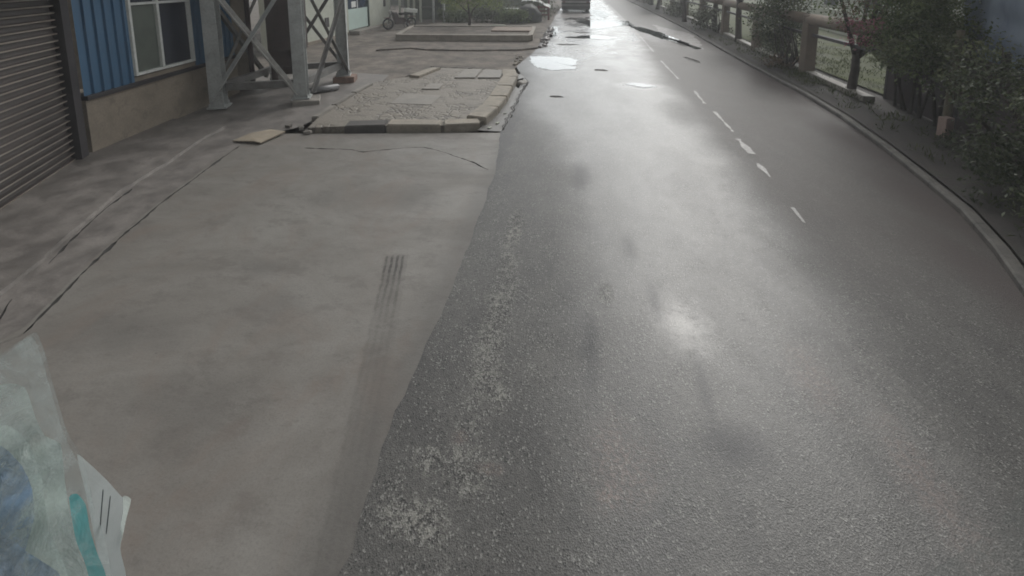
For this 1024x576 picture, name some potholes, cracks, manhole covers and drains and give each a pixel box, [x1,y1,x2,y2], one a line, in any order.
crack [309,147,486,169]
crack [49,189,132,263]
crack [0,299,31,344]
